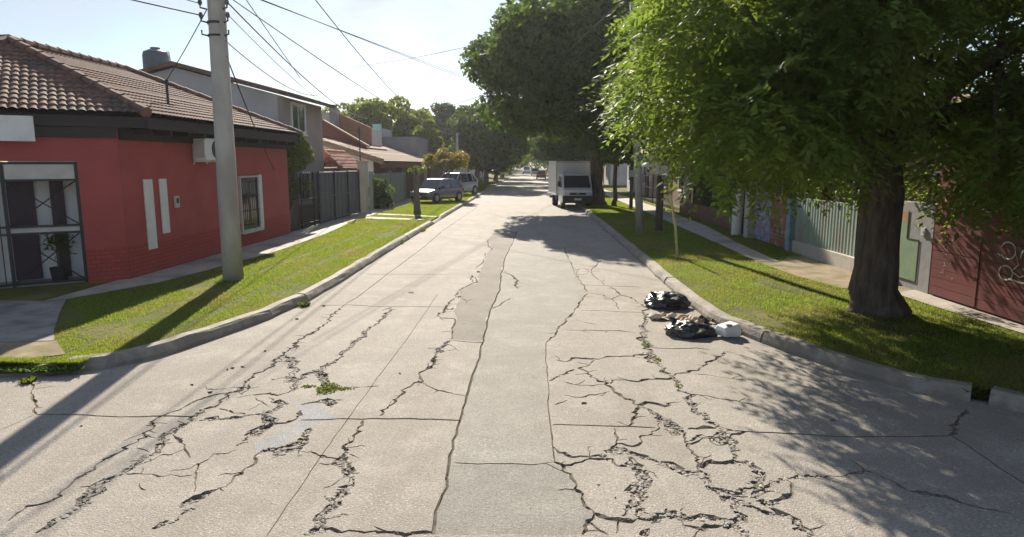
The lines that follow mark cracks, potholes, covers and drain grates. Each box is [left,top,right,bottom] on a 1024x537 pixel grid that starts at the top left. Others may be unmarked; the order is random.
crack [545,249,1011,537]
crack [8,239,493,537]
